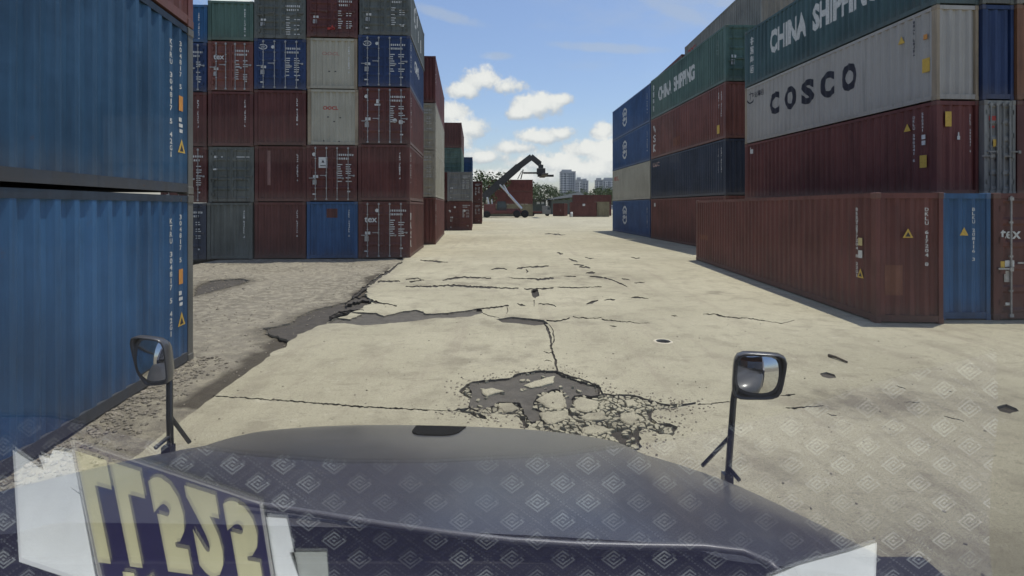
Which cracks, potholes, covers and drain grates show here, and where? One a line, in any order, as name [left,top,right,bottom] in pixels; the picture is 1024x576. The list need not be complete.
crack [707,313,793,324]
crack [421,233,696,450]
pothole [997,404,1018,414]
crack [329,262,403,319]
crack [780,394,964,422]
pothole [326,308,483,325]
